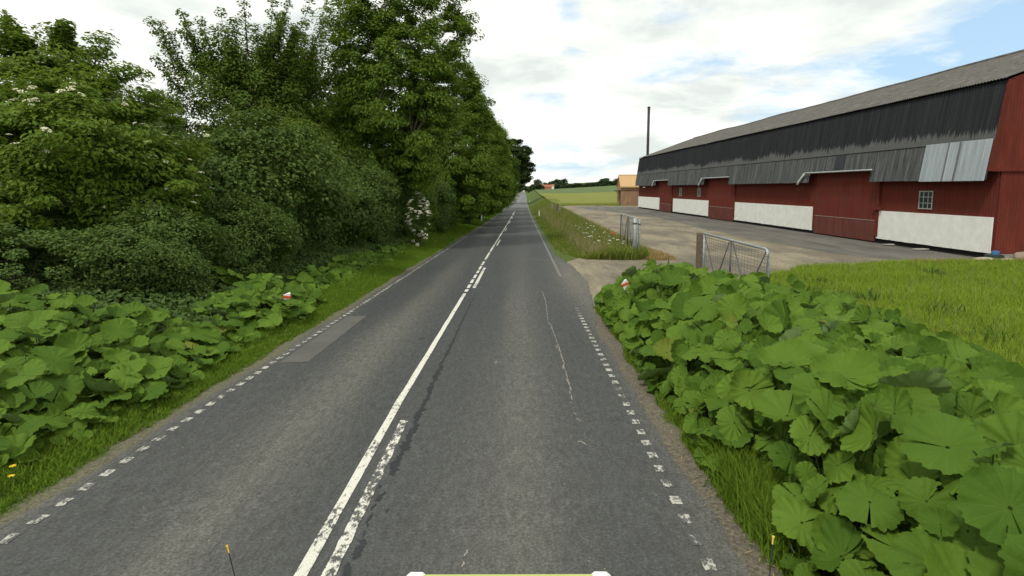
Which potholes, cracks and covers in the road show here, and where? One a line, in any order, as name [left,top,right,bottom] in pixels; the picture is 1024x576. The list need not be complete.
crack [542,291,585,435]
